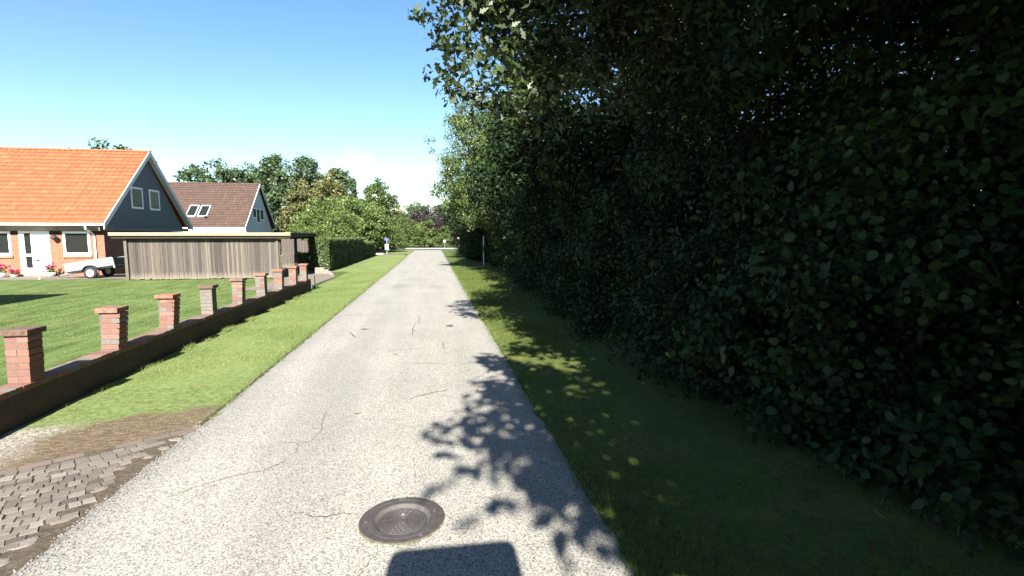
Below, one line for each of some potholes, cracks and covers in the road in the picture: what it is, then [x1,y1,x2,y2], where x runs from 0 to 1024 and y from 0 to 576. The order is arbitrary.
manhole cover [358,497,445,545]
crack [169,413,326,497]
